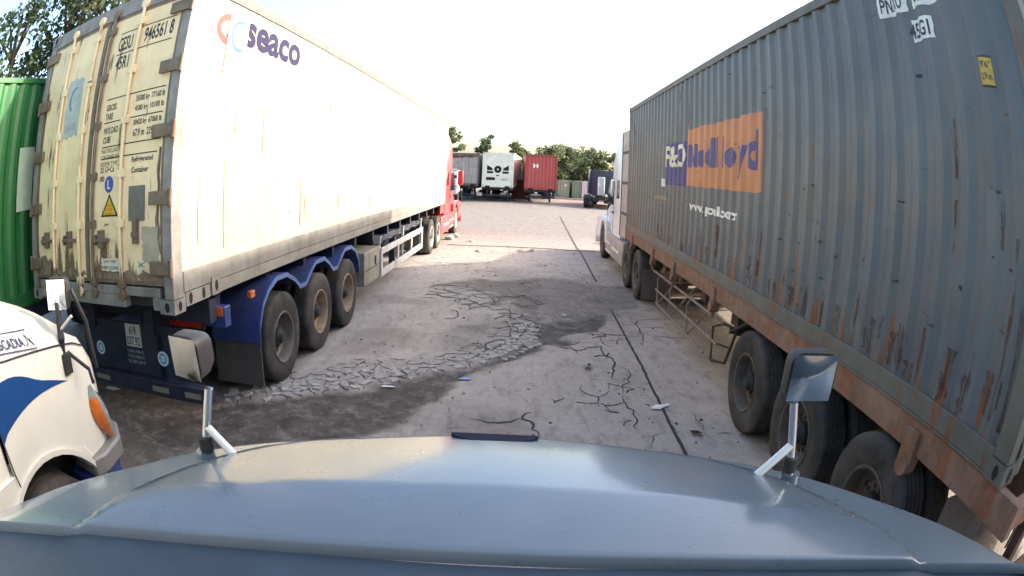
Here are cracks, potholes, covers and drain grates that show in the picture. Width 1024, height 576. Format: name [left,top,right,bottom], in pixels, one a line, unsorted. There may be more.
crack [448,319,674,444]
crack [236,264,548,406]
